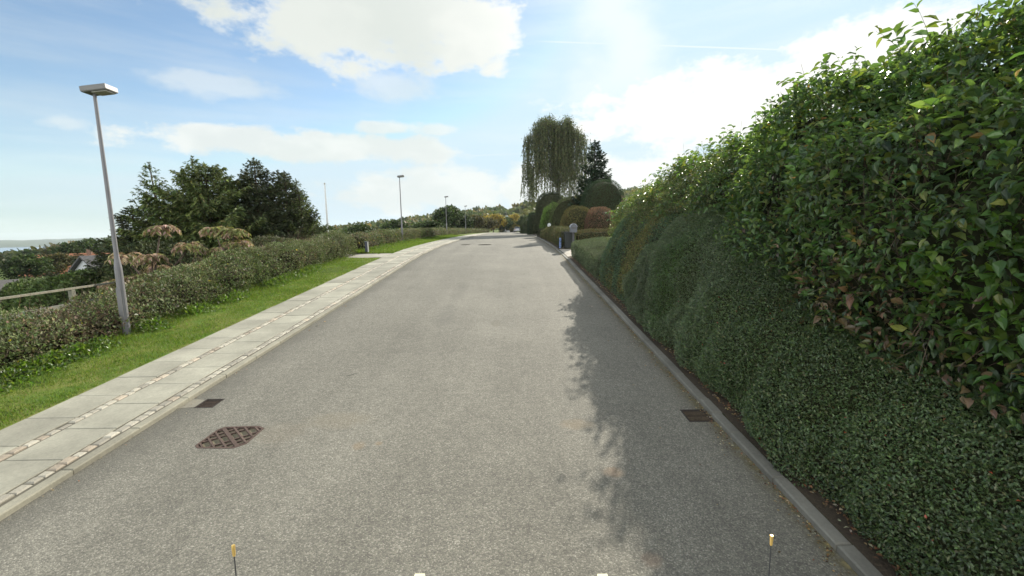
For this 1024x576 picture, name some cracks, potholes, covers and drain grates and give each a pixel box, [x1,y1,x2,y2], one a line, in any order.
drain grate [680,409,715,422]
drain grate [178,399,224,409]
